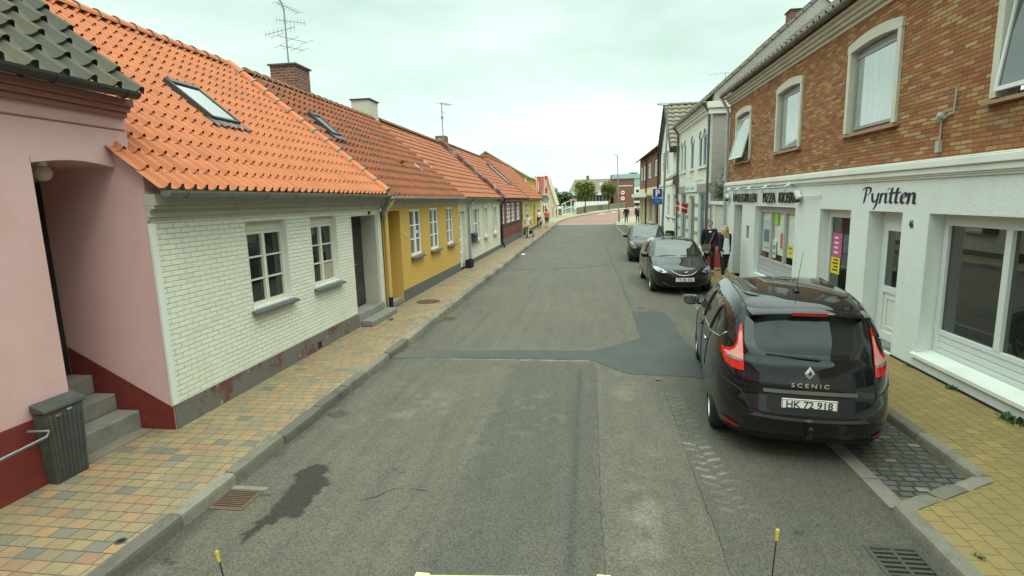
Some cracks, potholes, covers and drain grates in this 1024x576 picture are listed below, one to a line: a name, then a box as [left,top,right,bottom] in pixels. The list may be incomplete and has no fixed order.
drain grate [207,485,269,511]
drain grate [862,544,943,576]
